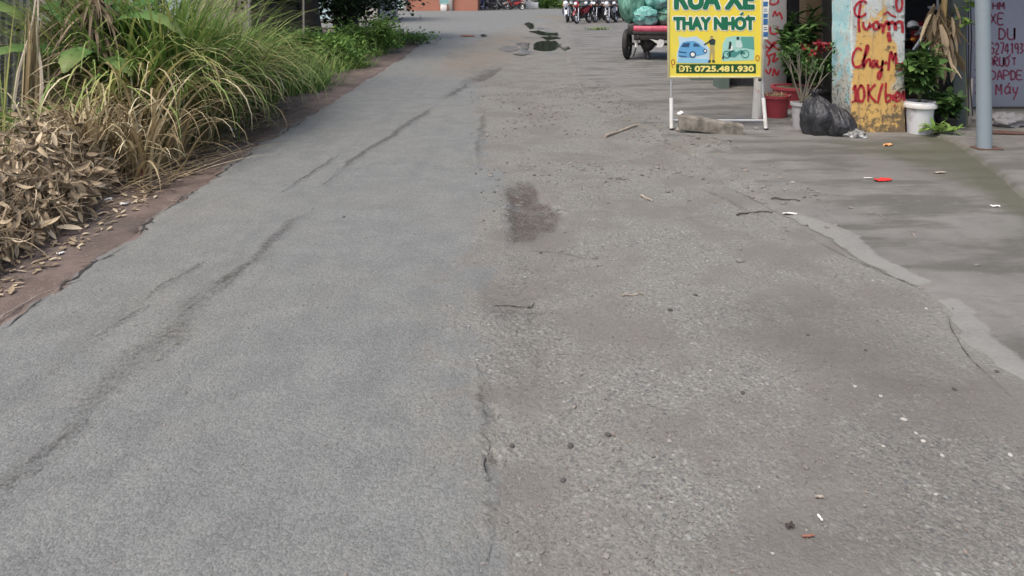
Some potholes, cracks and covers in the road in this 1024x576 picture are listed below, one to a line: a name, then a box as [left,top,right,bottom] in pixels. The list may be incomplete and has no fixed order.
crack [3,83,472,361]
crack [1,417,89,486]
